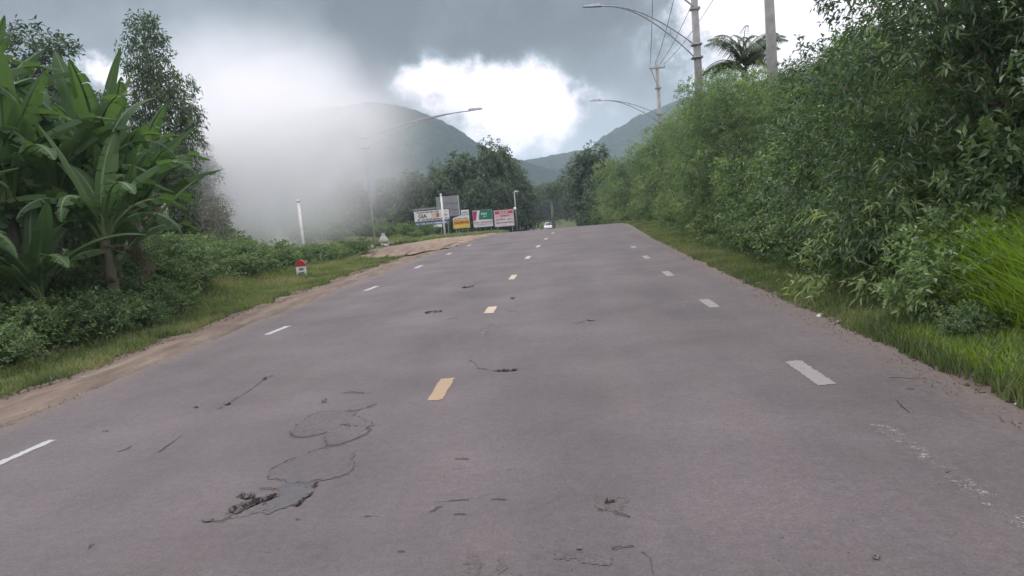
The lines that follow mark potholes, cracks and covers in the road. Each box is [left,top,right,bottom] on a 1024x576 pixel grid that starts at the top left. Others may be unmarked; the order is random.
pothole [229,492,279,514]
crack [612,545,653,572]
crack [429,499,469,515]
crack [214,391,376,522]
